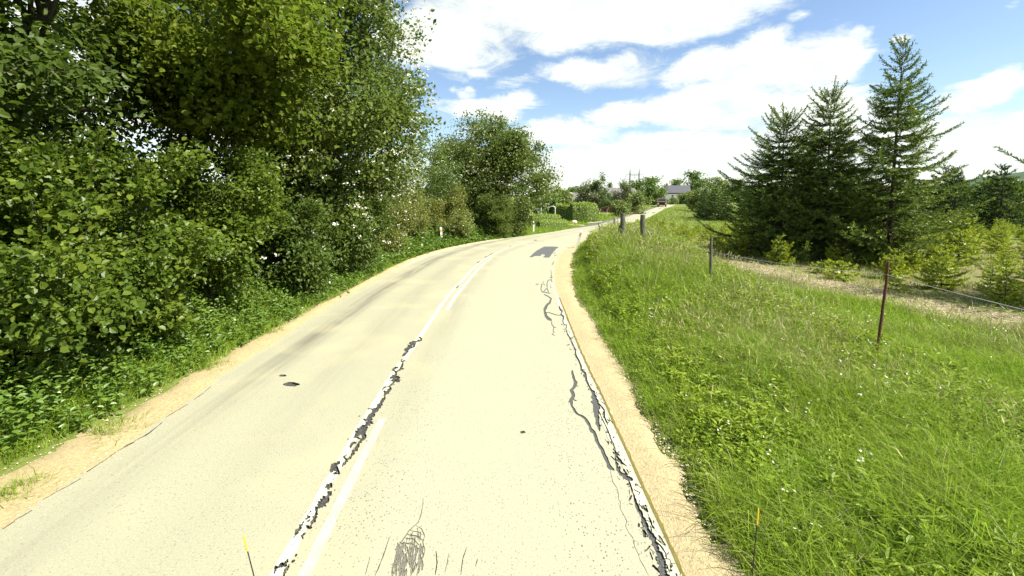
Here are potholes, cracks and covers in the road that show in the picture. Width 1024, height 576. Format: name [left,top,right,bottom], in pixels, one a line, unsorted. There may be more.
crack [537,253,672,576]
crack [274,337,422,576]
crack [365,504,478,576]
